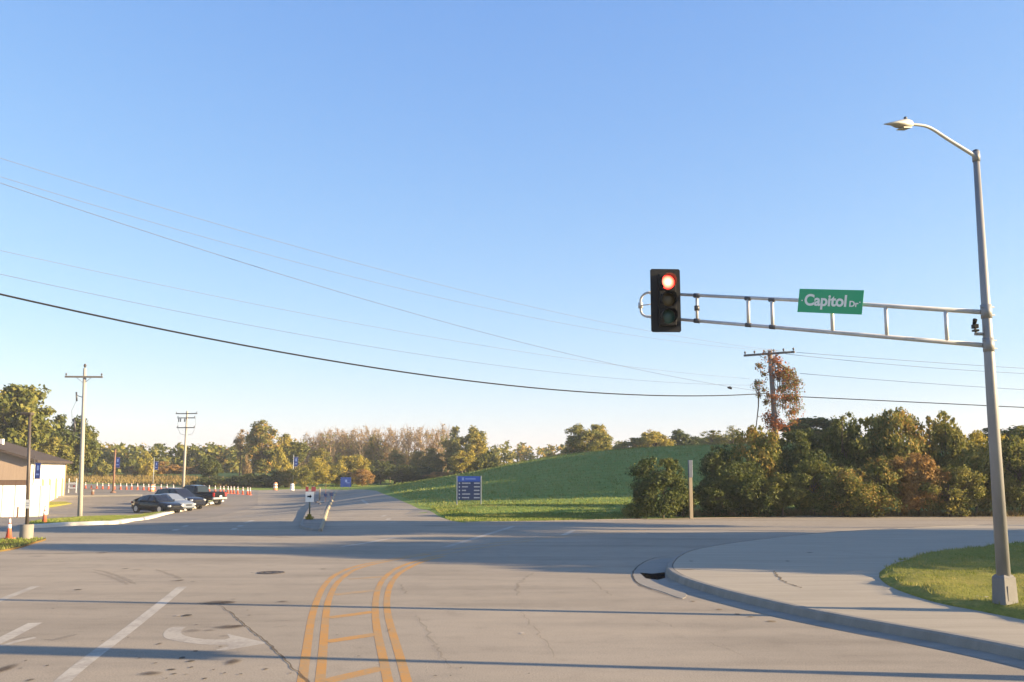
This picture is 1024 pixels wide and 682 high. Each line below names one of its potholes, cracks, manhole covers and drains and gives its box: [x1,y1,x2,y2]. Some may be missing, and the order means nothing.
crack [224,607,310,682]
drain grate [633,558,686,599]
